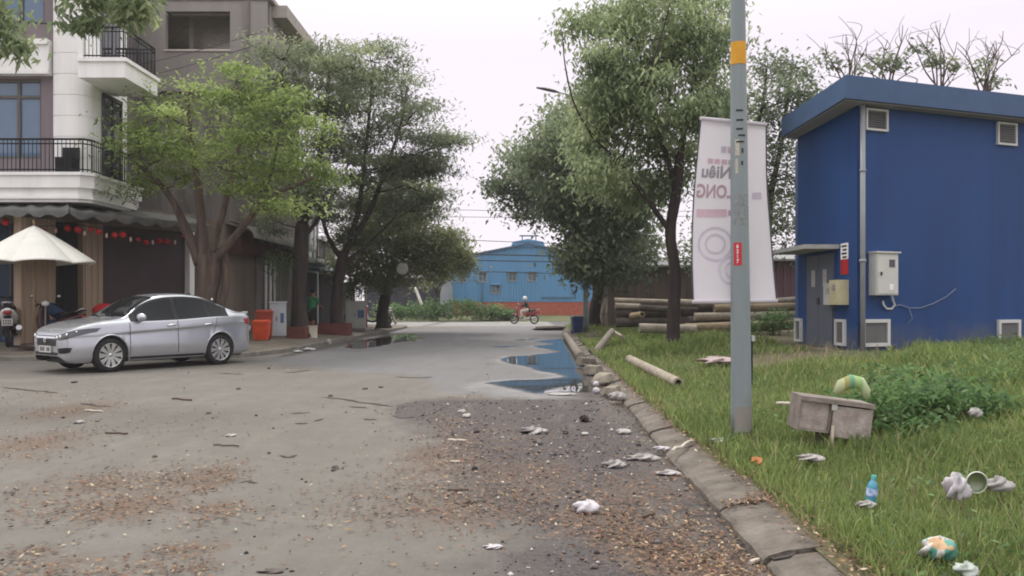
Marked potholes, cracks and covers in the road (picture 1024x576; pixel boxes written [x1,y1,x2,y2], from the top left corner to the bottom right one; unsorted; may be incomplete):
crack [326,397,388,420]
